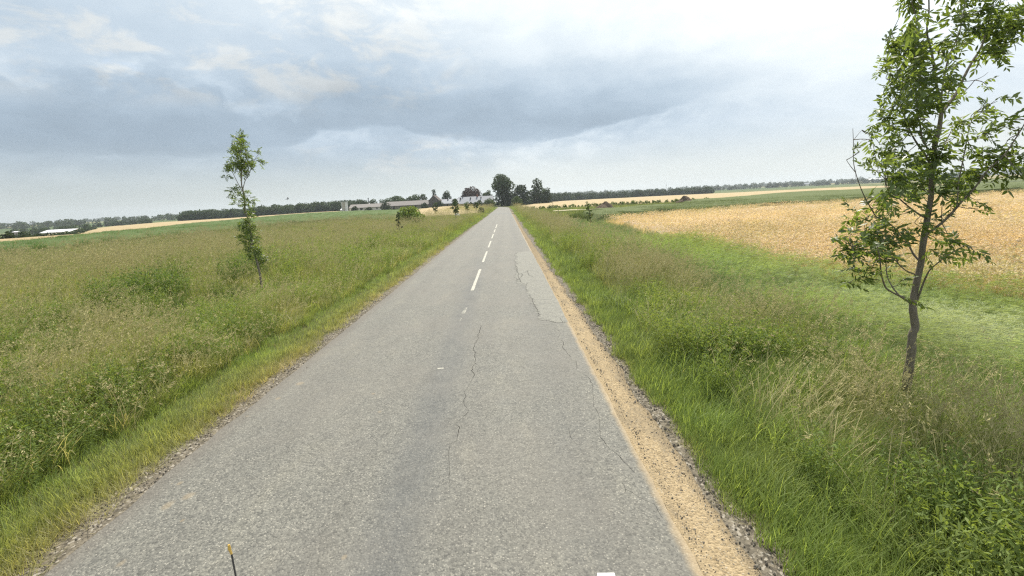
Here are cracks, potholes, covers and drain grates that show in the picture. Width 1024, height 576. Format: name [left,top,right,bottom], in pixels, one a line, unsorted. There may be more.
crack [448,328,481,482]
crack [516,261,662,517]
